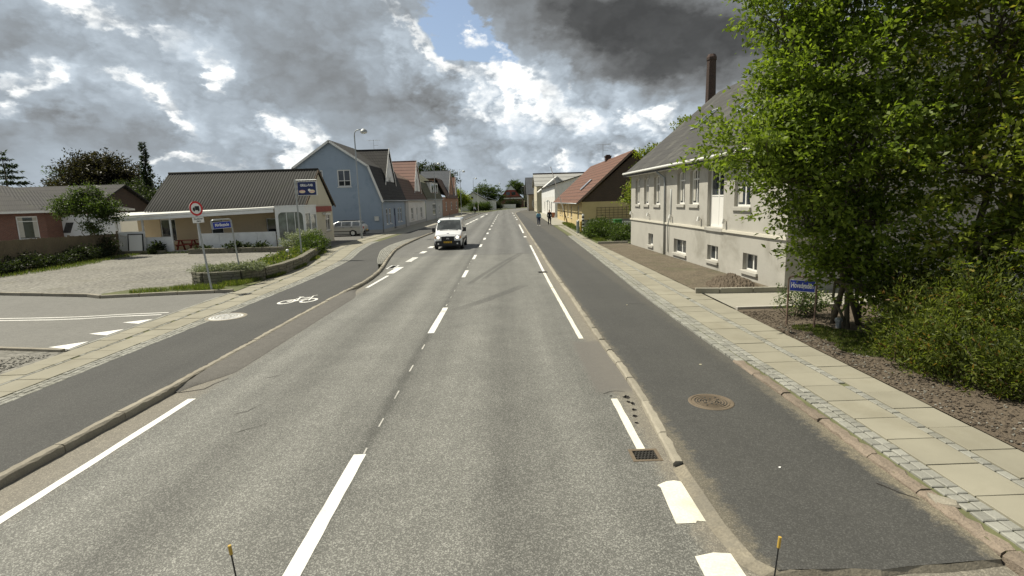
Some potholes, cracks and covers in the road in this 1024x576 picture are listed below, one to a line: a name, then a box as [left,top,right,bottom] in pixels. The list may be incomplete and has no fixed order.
drain grate [628,448,664,462]
manhole cover [204,313,248,321]
manhole cover [688,394,735,410]
